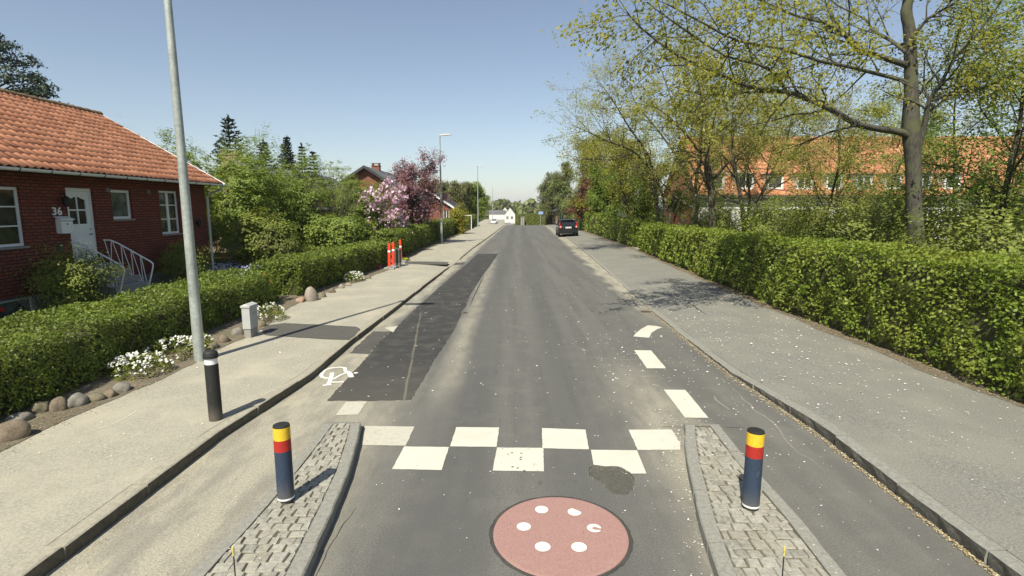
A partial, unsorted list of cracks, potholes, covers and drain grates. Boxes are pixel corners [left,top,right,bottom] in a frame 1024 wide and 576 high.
crack [714,385,821,468]
